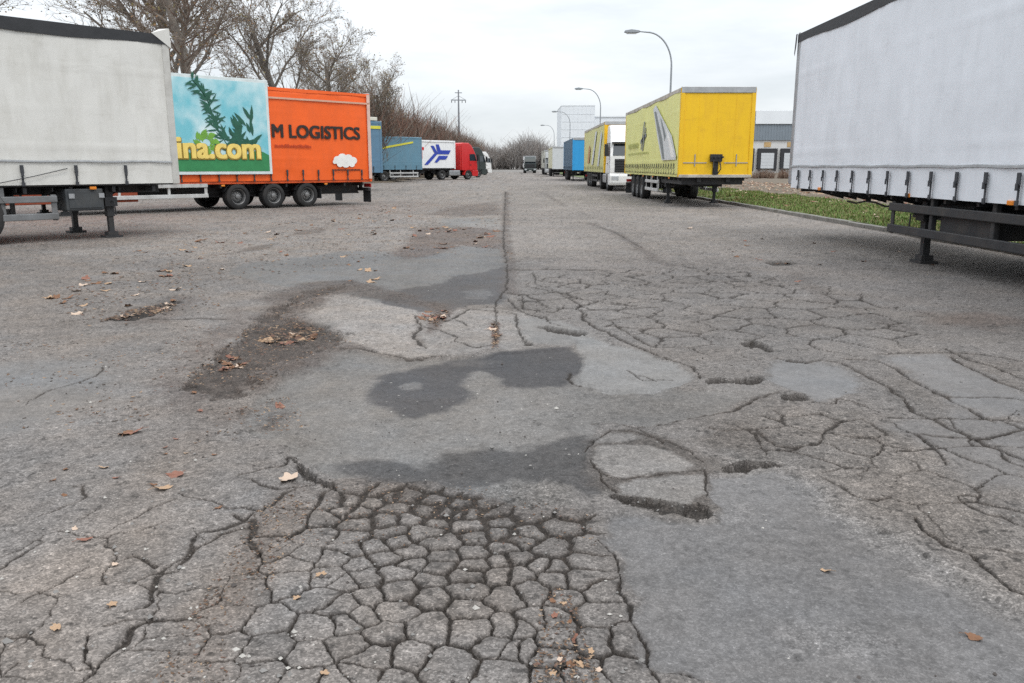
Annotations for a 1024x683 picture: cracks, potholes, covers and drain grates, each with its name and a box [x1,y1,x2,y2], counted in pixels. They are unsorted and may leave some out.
pothole [722,459,784,475]
crack [0,263,1024,683]
pothole [740,340,774,353]
pothole [611,494,687,516]
pothole [110,300,183,321]
pothole [781,393,812,401]
pothole [705,375,766,385]
pothole [683,502,713,522]
